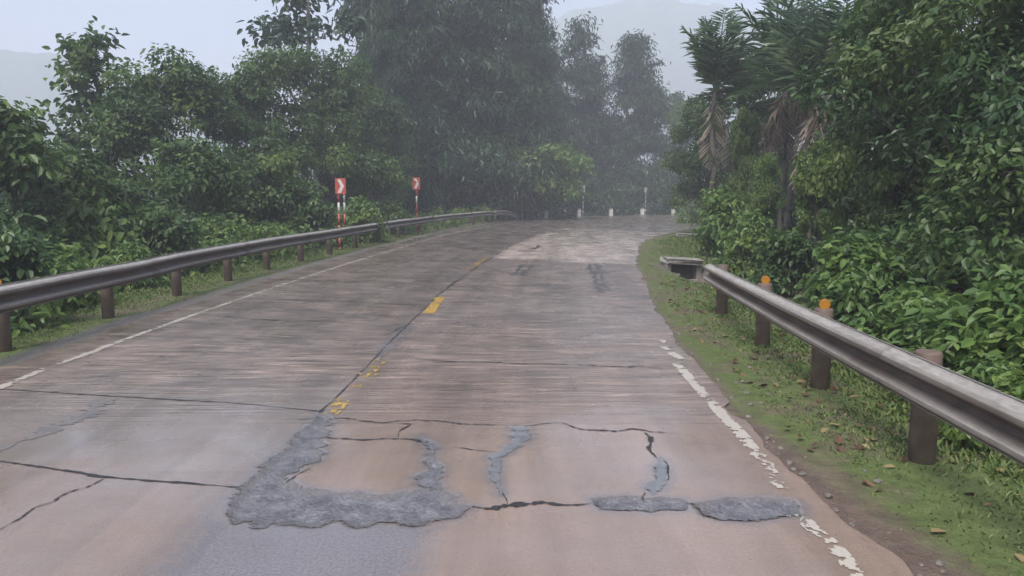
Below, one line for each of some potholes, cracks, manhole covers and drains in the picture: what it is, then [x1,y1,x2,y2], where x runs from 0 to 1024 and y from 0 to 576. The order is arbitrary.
crack [526,422,669,479]
crack [472,492,593,510]
crack [0,398,118,452]
crack [427,359,675,370]
crack [1,477,105,529]
crack [328,418,499,443]
